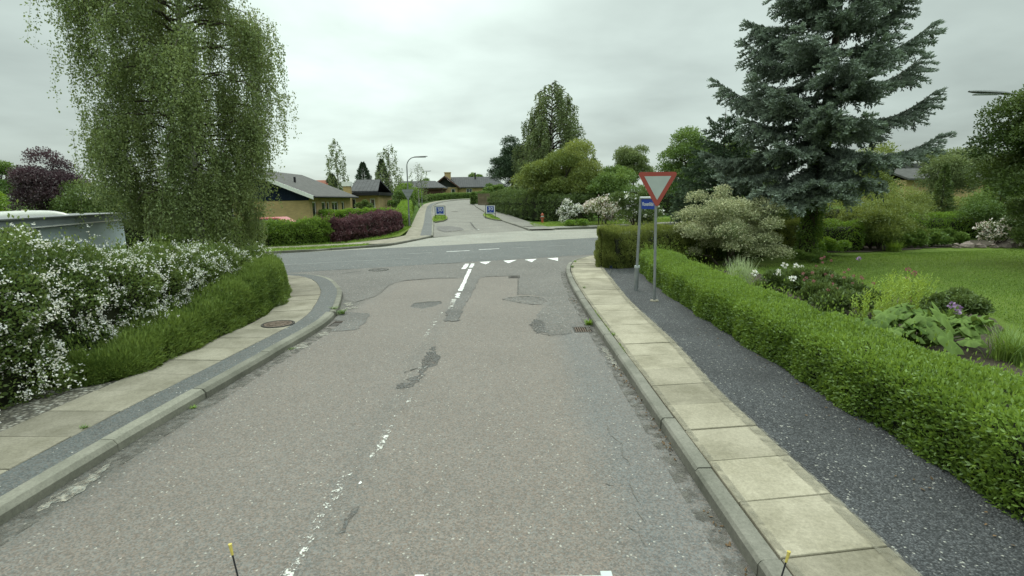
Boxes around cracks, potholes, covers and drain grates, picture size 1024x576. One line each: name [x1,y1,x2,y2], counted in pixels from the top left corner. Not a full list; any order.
crack [607,480,646,546]
manhole cover [261,320,295,328]
